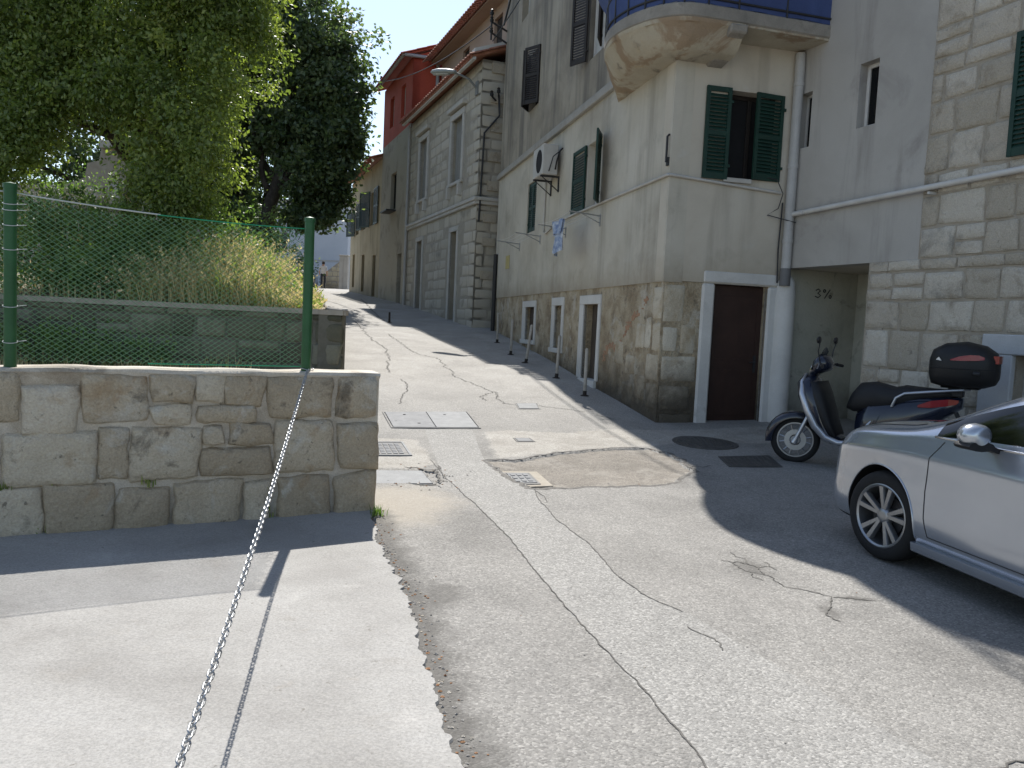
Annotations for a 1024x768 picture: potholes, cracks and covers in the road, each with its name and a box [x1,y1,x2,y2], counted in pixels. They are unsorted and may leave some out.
crack [355,300,584,412]
manhole cover [672,436,739,450]
manhole cover [382,411,481,429]
manhole cover [718,455,782,468]
crack [407,460,876,768]
